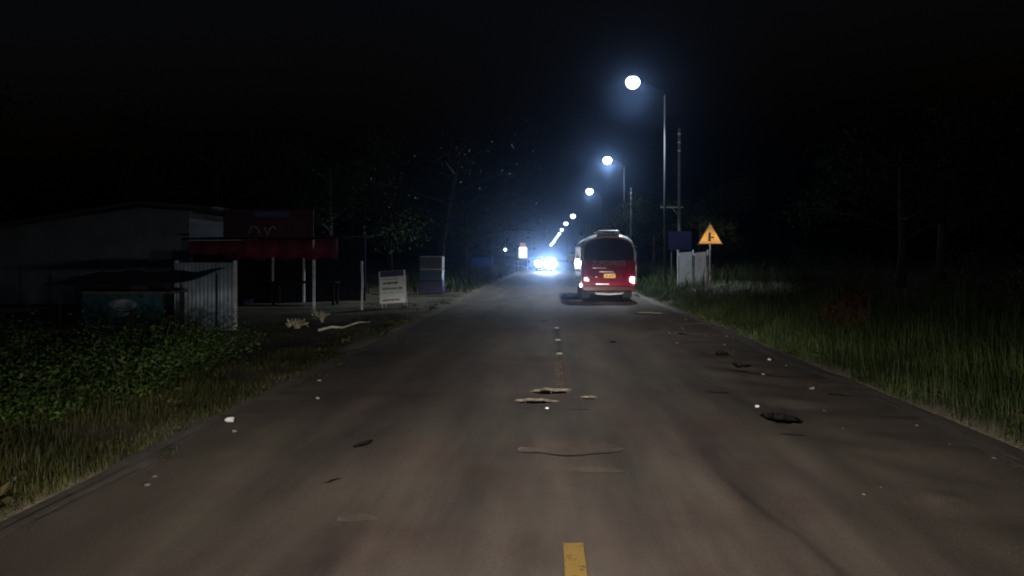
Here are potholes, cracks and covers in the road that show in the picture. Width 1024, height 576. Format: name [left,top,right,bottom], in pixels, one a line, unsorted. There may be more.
pothole [760,412,804,424]
